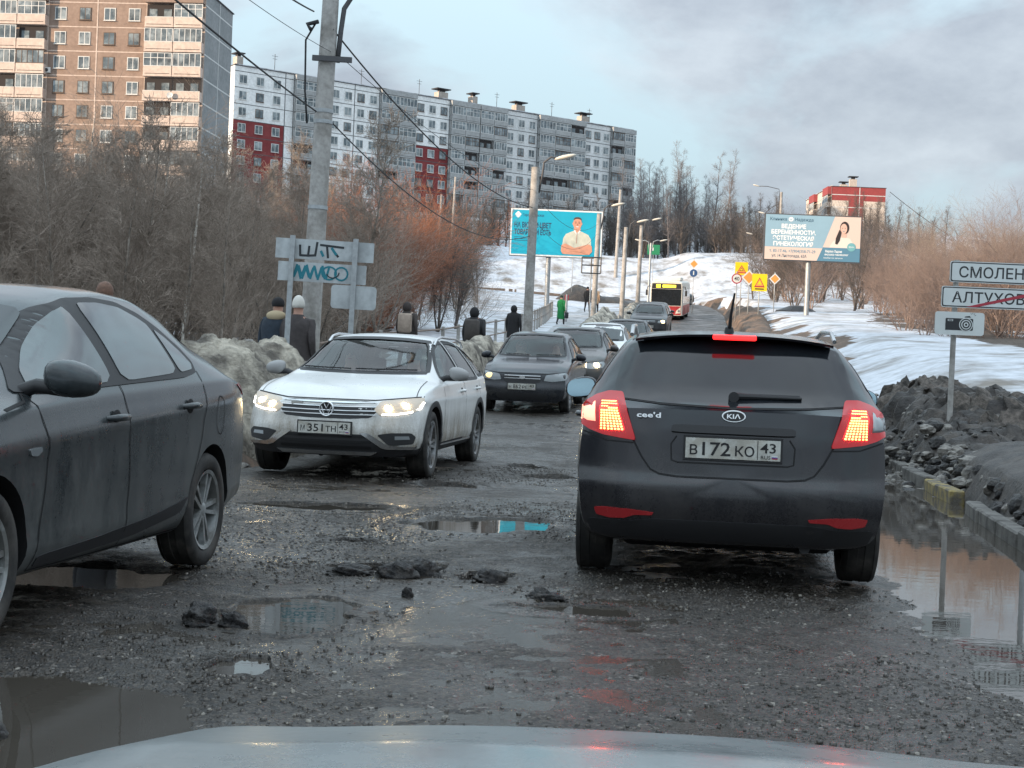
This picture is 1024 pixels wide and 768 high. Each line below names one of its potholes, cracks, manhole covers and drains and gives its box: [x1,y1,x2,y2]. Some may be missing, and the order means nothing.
pothole [188,650,289,685]
pothole [442,569,532,584]
pothole [384,514,567,538]
pothole [226,501,407,514]
pothole [499,463,552,471]
pothole [311,562,473,575]
pothole [198,593,386,640]
pothole [507,473,578,481]
pothole [483,602,684,621]
